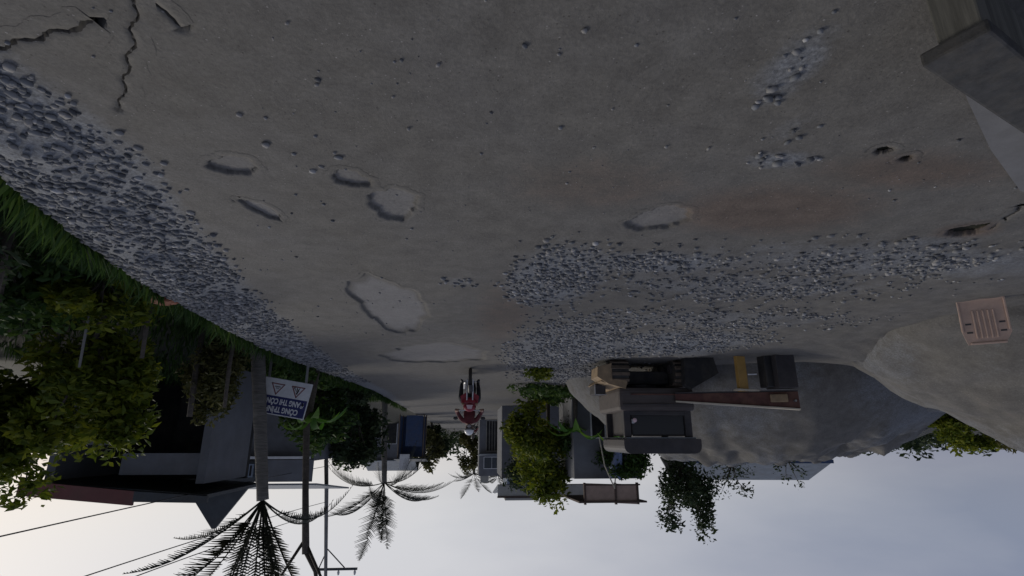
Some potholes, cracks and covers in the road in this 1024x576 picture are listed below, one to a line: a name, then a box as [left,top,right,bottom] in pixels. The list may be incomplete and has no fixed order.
pothole [323,165,381,191]
pothole [195,151,267,180]
pothole [230,196,288,224]
crack [980,204,1024,231]
pothole [372,341,494,364]
crack [0,0,193,114]
pothole [617,202,699,234]
pothole [863,142,905,159]
pothole [937,219,1007,240]
pothole [340,270,436,334]
pothole [360,185,425,224]
